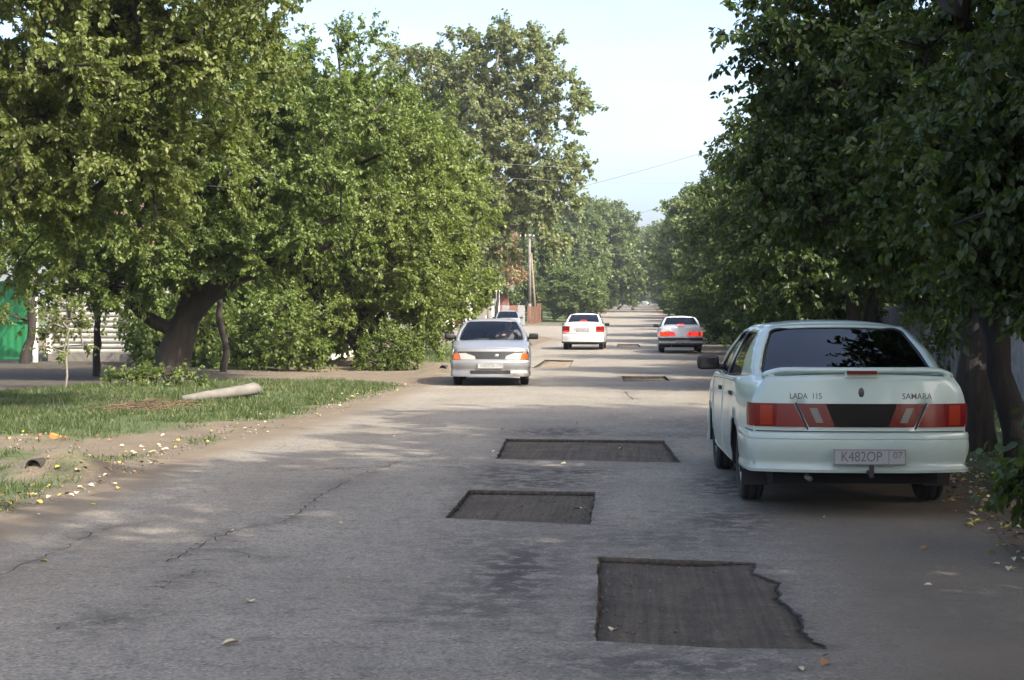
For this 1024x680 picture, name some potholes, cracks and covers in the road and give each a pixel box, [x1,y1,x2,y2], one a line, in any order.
pothole [495,439,680,462]
crack [154,462,397,590]
pothole [594,557,827,649]
pothole [532,360,573,368]
pothole [446,490,596,525]
crack [1,524,127,575]
